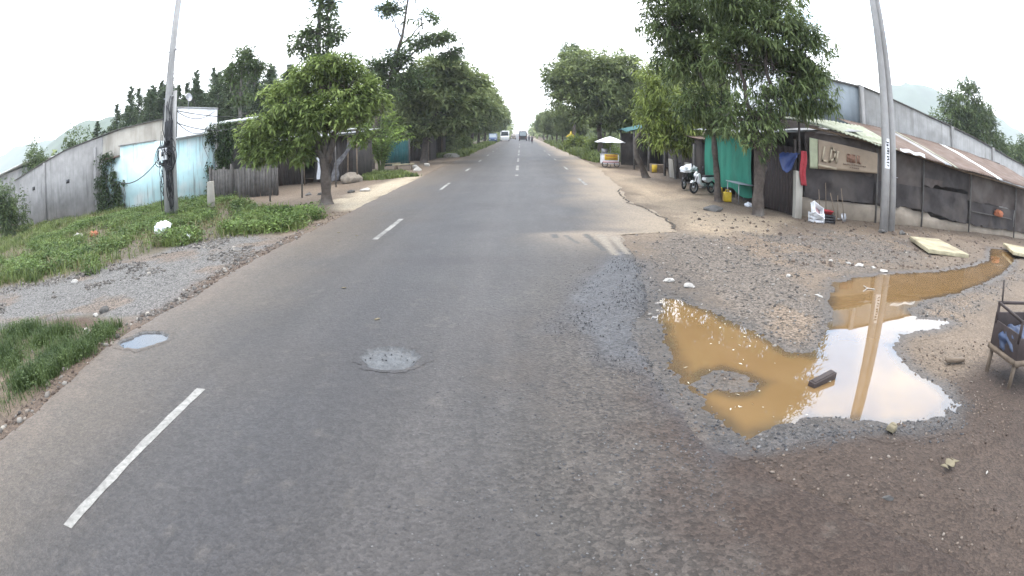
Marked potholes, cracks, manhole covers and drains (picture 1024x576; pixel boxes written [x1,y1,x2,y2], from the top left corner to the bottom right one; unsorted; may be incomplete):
pothole [112,328,175,352]
pothole [352,342,435,373]
crack [617,188,680,231]
pothole [626,245,1024,461]
